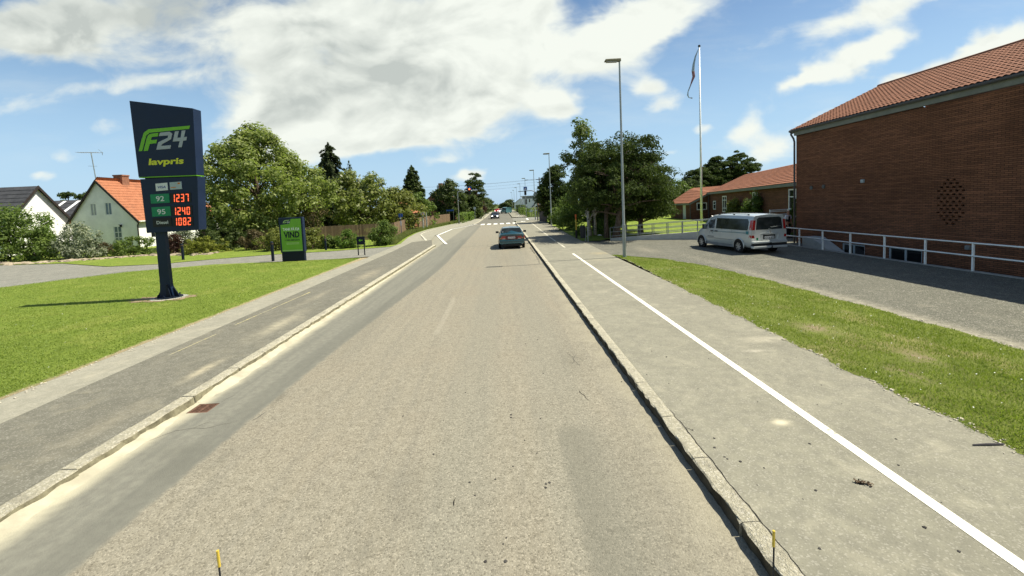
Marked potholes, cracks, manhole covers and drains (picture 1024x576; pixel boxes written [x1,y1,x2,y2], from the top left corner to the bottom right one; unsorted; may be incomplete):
drain grate [188,403,219,413]
